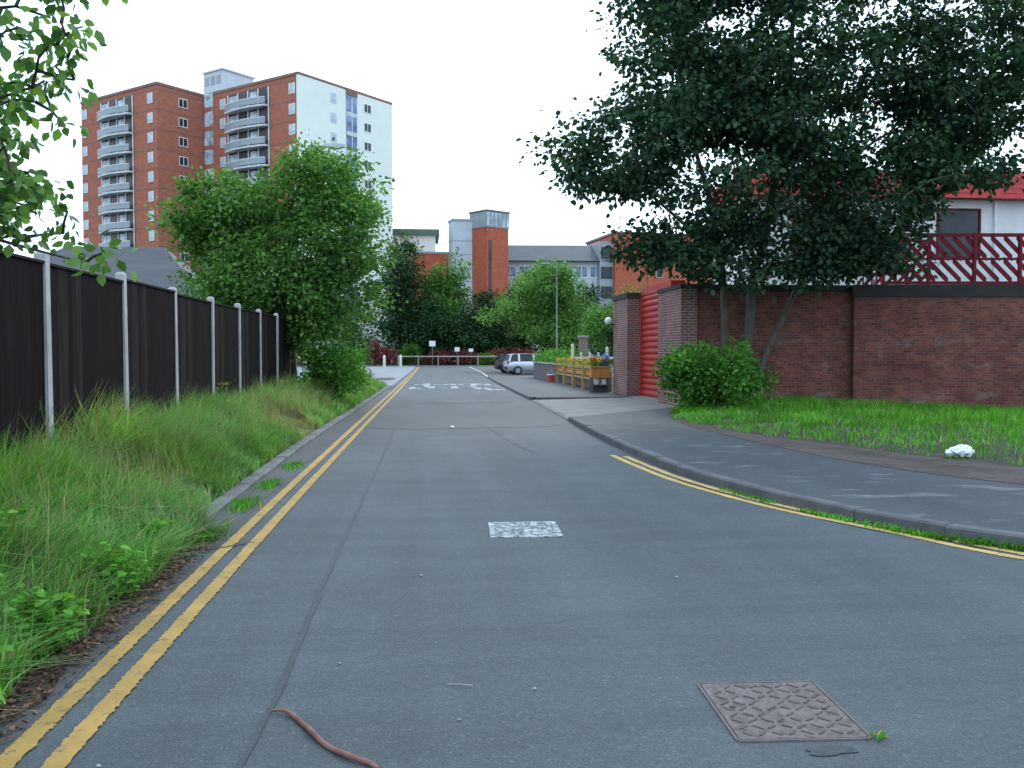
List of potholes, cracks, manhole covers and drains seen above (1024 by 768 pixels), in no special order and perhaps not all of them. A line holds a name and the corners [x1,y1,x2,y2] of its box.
manhole cover [697,680,872,743]
